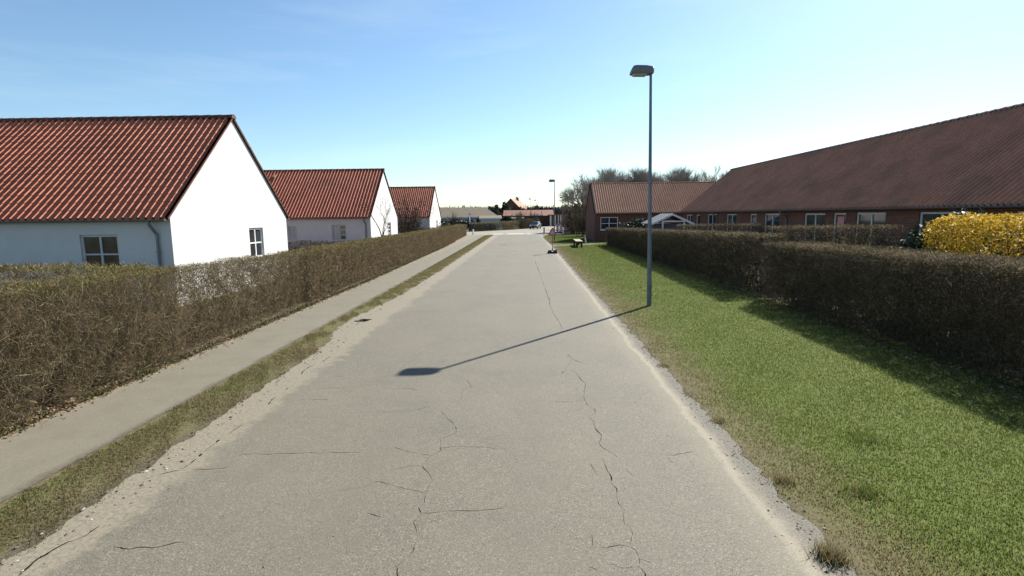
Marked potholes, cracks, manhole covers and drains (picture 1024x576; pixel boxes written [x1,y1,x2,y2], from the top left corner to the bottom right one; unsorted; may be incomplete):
crack [19,526,178,576]
crack [141,357,357,481]
crack [338,407,504,576]
crack [558,356,649,576]
